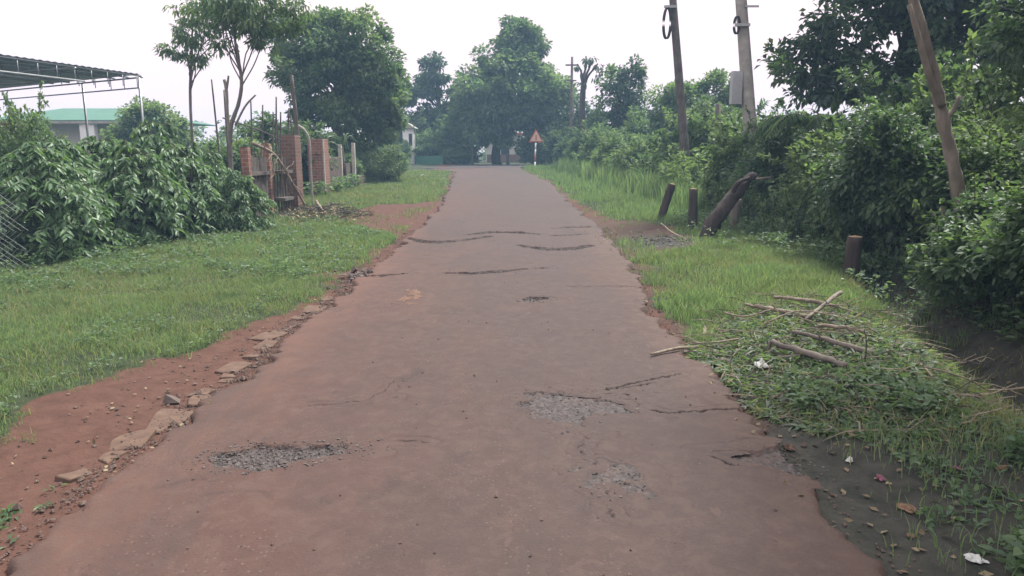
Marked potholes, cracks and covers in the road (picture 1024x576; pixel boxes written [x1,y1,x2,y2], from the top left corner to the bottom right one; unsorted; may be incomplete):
pothole [552,446,686,511]
crack [682,439,784,473]
crack [297,379,407,409]
crack [558,371,751,419]
pothole [180,436,391,482]
pothole [515,296,556,304]
